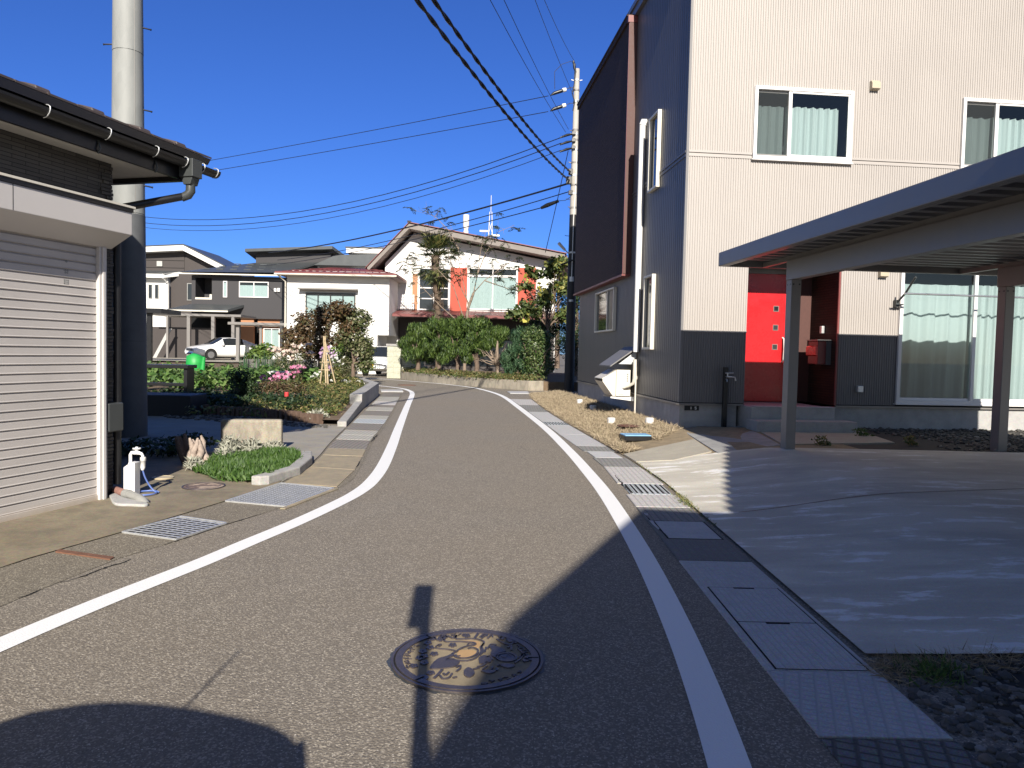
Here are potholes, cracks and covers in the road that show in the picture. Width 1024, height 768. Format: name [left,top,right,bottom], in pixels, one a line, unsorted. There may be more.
drain grate [225,482,334,507]
manhole cover [386,628,546,695]
drain grate [122,516,227,540]
utility cover [181,482,225,490]
